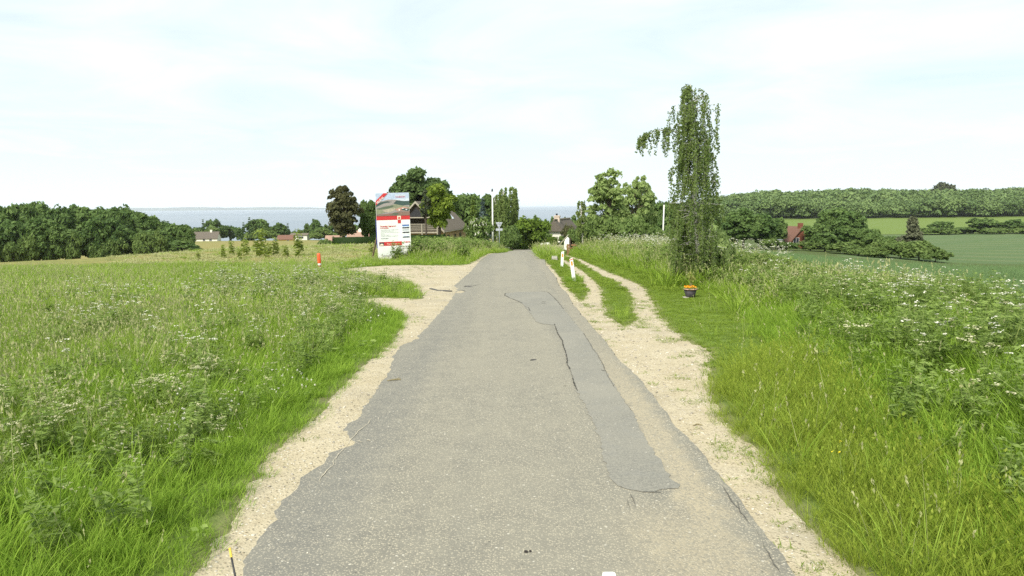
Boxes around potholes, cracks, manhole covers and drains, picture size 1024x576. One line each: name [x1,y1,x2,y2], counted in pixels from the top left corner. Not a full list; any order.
crack [724,488,781,574]
crack [555,326,578,391]
